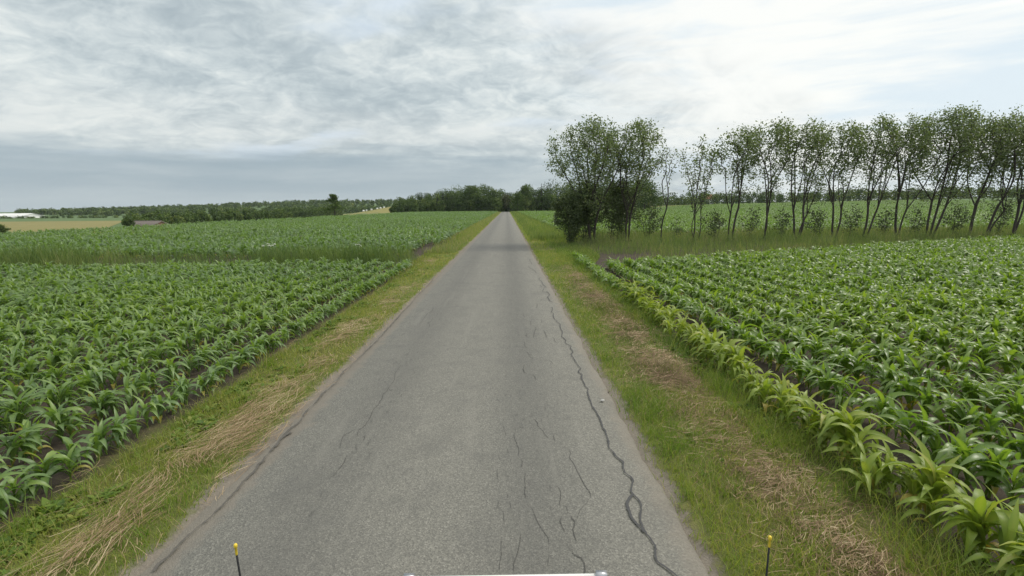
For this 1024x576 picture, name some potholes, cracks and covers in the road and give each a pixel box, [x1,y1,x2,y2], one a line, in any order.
crack [496,421,591,574]
